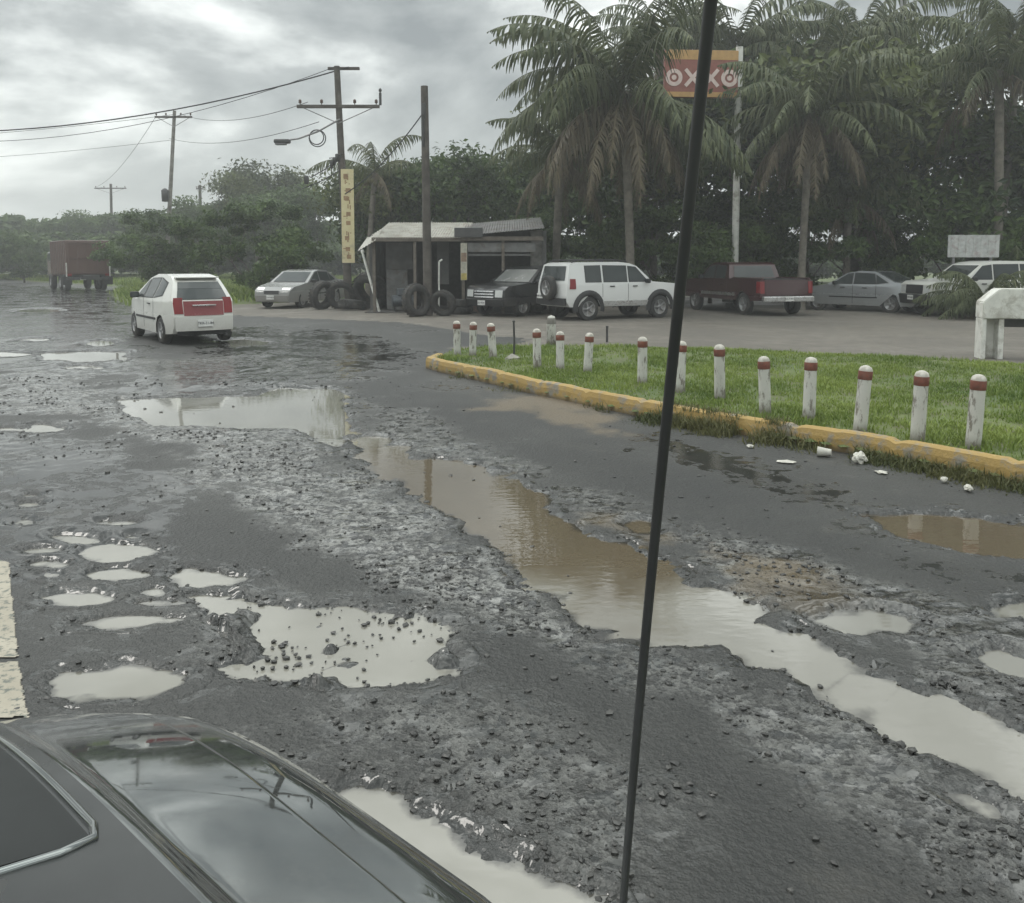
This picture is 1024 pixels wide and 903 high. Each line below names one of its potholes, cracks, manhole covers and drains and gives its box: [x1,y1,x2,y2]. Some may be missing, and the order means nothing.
pothole [110,384,358,453]
pothole [178,584,482,695]
pothole [347,430,1024,803]
pothole [69,560,167,584]
pothole [20,652,214,708]
pothole [303,765,639,903]
pothole [154,560,266,595]
pothole [49,605,202,635]
pothole [17,580,129,610]
pothole [28,349,134,362]
pothole [67,538,173,568]
